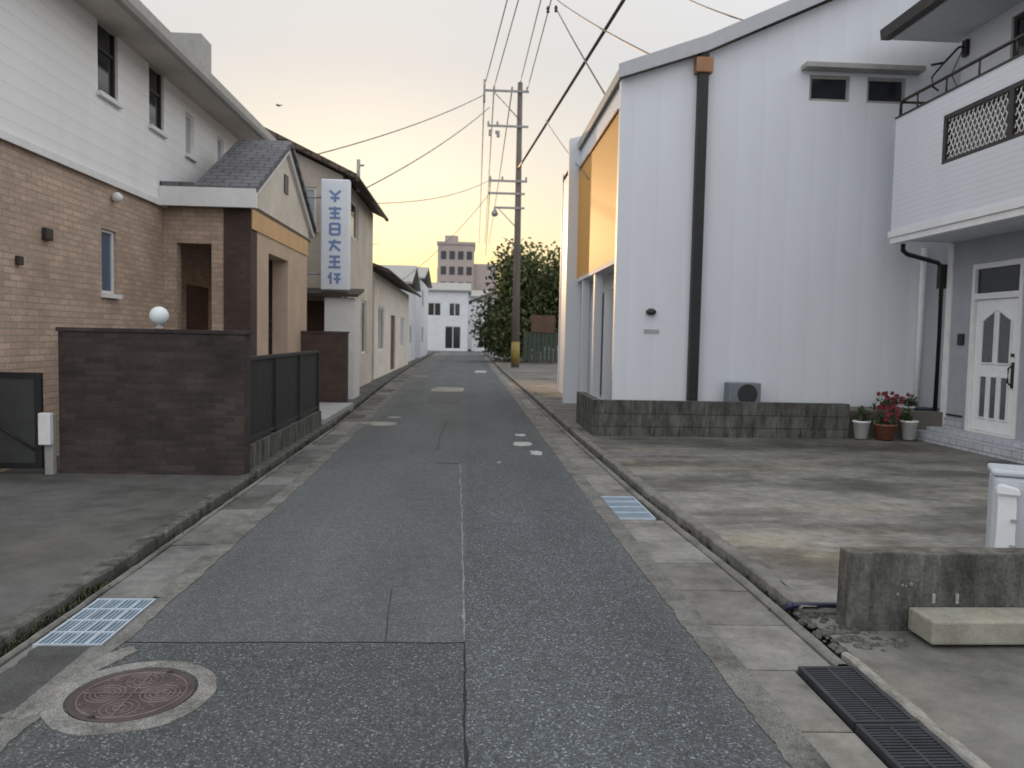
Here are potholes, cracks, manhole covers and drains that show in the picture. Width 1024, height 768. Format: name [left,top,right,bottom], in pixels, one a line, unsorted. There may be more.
manhole cover [40,661,217,736]
drain grate [601,496,656,520]
drain grate [32,598,156,648]
drain grate [798,666,918,733]
drain grate [855,723,972,768]
